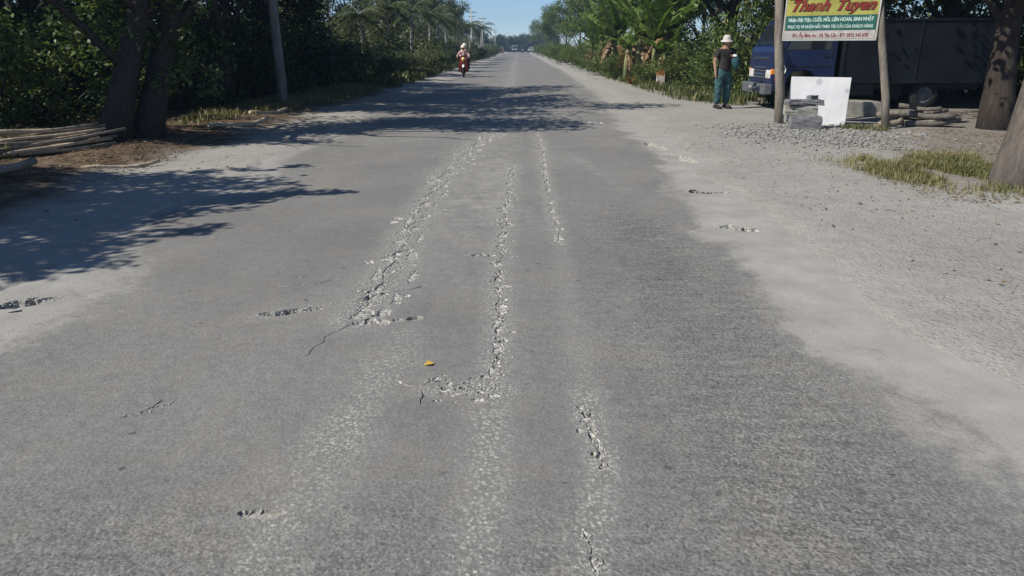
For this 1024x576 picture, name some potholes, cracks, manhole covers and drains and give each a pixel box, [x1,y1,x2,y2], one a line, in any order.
pothole [237,508,286,519]
crack [121,399,176,418]
crack [581,528,608,576]
pothole [0,295,67,313]
pothole [714,224,765,232]
crack [570,406,620,470]
crack [396,130,564,404]
crack [270,129,508,357]
pothole [257,307,330,316]
